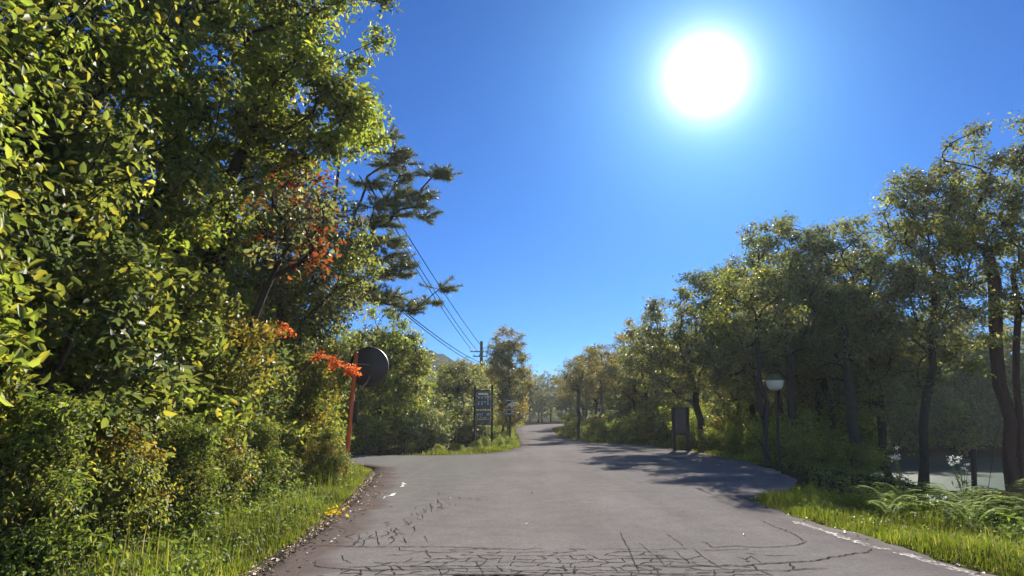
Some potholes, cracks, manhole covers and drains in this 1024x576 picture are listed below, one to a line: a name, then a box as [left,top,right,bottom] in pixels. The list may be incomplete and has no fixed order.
crack [314,497,872,576]
